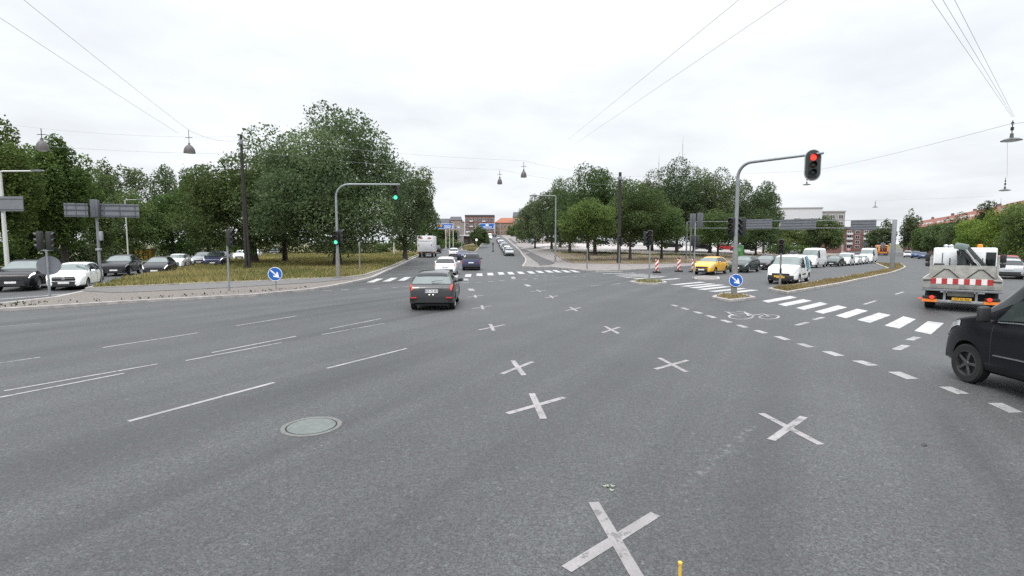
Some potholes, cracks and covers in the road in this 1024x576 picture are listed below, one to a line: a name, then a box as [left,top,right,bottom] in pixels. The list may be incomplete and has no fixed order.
manhole cover [280,416,342,437]
